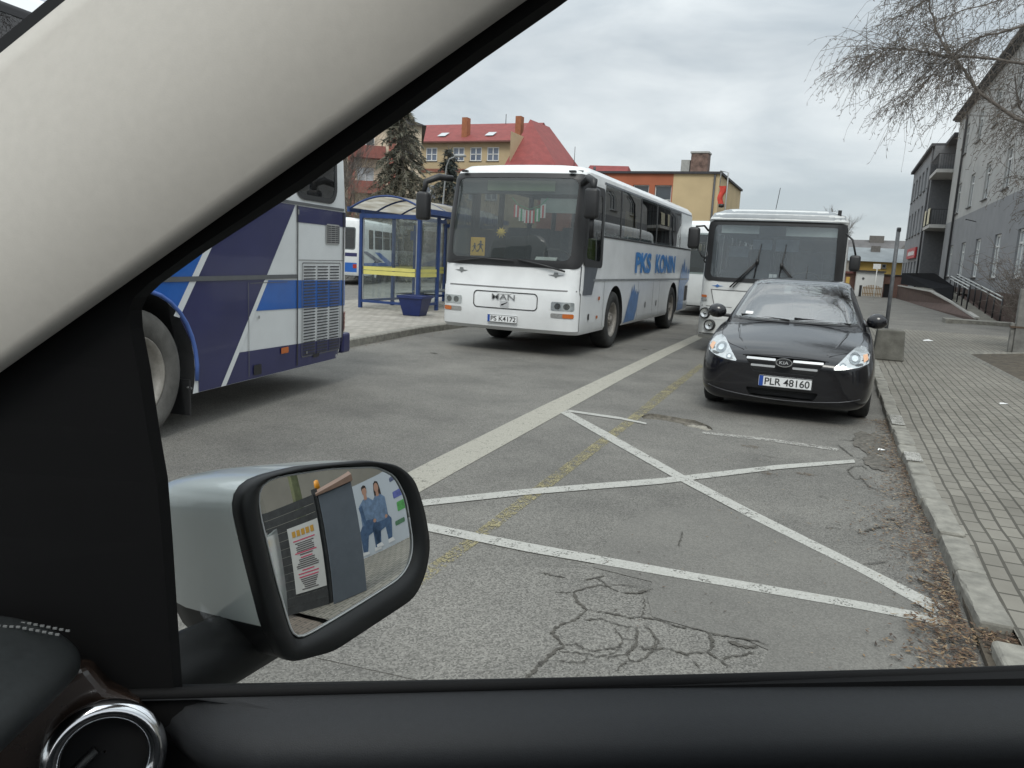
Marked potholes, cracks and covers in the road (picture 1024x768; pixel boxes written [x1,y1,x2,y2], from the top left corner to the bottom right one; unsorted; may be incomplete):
crack [525,572,758,678]
pothole [641,414,713,430]
